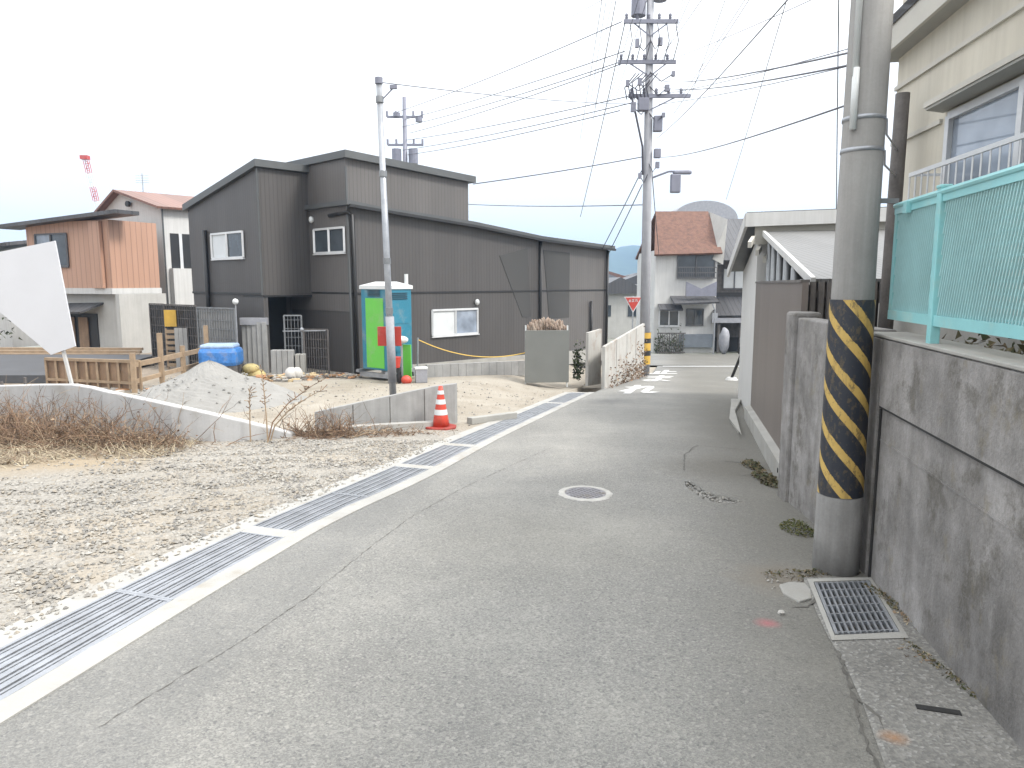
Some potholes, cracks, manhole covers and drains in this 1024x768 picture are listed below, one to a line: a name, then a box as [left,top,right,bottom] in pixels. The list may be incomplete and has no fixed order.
crack [683,445,752,476]
manhole cover [558,486,613,502]
drain grate [807,577,909,640]
